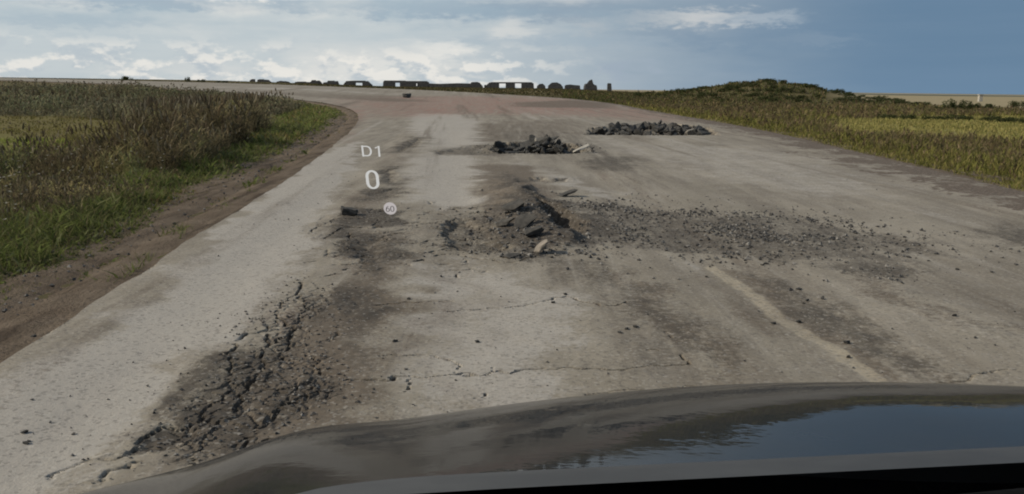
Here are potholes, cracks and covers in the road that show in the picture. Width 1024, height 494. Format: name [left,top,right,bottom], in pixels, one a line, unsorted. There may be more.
pothole [435,218,516,254]
pothole [490,141,591,154]
pothole [528,193,592,235]
crack [114,198,1018,467]
pothole [429,145,497,155]
